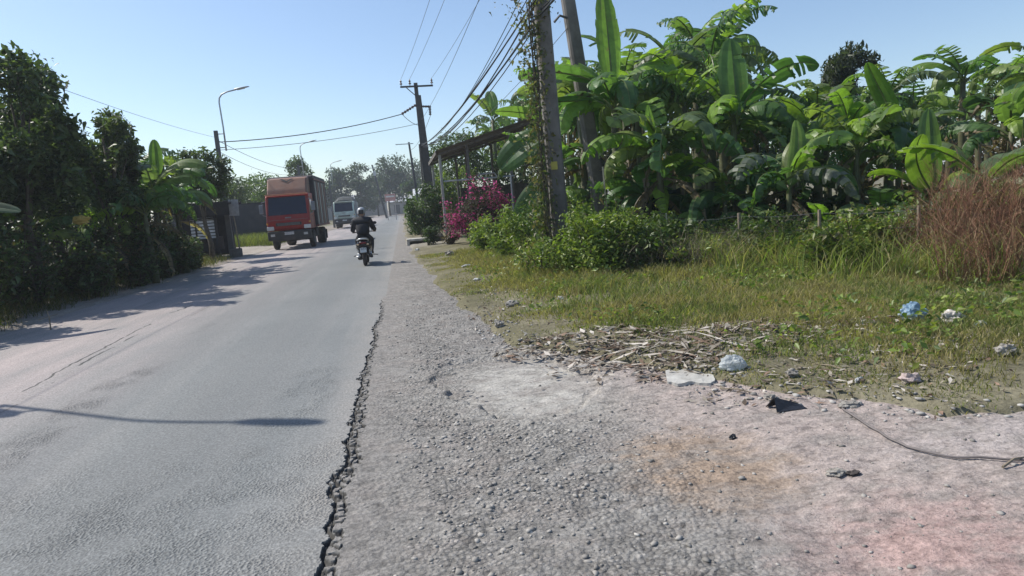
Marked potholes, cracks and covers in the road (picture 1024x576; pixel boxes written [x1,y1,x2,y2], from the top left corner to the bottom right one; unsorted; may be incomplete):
crack [314,300,385,576]
crack [21,305,191,392]
